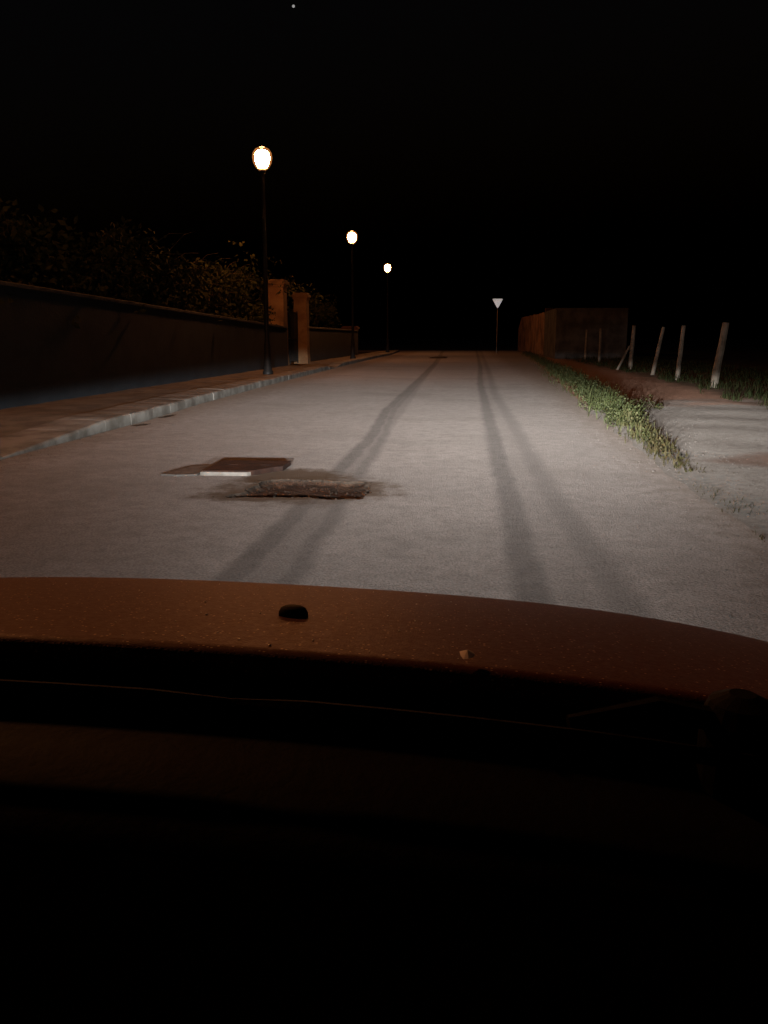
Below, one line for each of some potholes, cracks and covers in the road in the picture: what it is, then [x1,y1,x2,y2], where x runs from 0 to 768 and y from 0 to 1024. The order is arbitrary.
pothole [225,477,372,500]
manhole cover [161,460,291,476]
